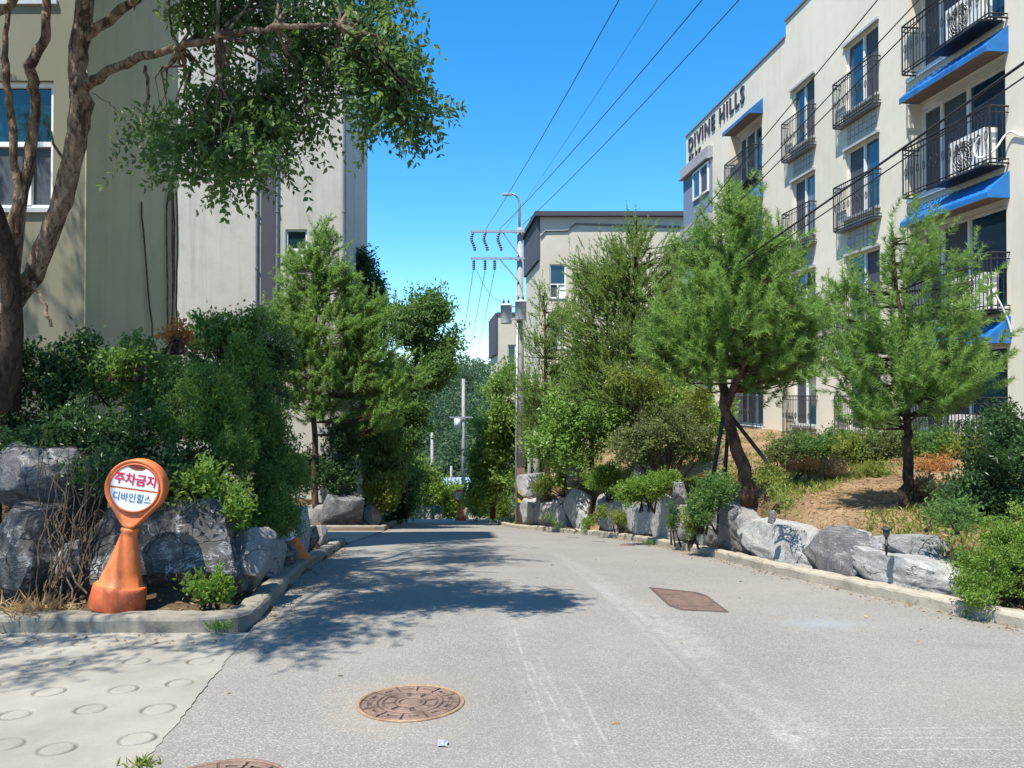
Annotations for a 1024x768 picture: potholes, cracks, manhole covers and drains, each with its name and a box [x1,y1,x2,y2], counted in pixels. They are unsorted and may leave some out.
manhole cover [649,587,729,613]
manhole cover [187,758,285,768]
manhole cover [356,684,465,723]
